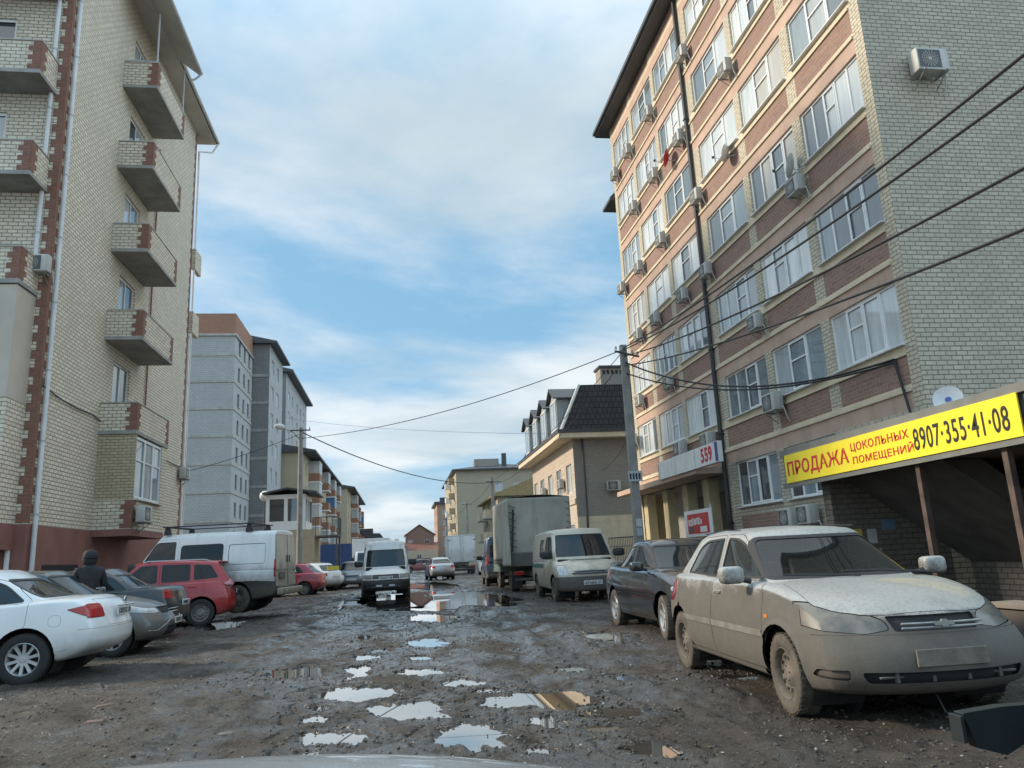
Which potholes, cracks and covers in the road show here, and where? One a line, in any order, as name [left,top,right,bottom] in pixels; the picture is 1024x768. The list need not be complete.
pothole [285,682,425,711]
pothole [423,676,507,690]
pothole [184,620,255,633]
pothole [378,665,468,680]
pothole [386,637,470,650]
pothole [398,718,536,759]
pothole [410,582,476,591]
pothole [564,628,643,647]
pothole [266,726,395,753]
pothole [464,687,628,717]
pothole [341,591,541,614]
